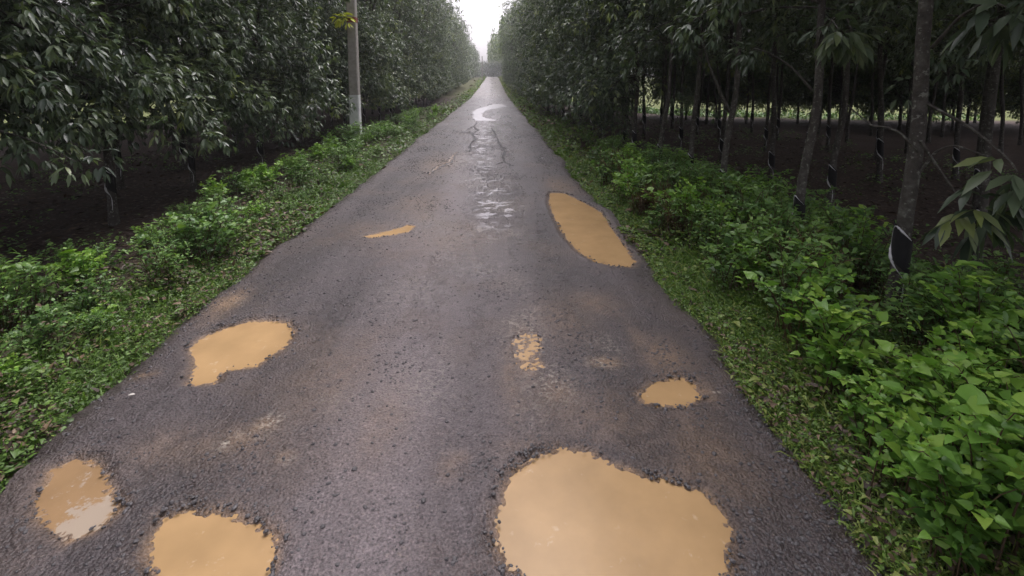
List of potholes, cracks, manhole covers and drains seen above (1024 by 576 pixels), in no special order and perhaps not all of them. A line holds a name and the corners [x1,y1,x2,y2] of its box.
pothole [168,312,309,393]
crack [424,123,514,175]
pothole [0,442,148,565]
pothole [352,222,423,241]
pothole [502,327,556,379]
pothole [619,366,722,418]
pothole [470,431,761,576]
pothole [542,191,649,271]
pothole [115,486,305,576]
